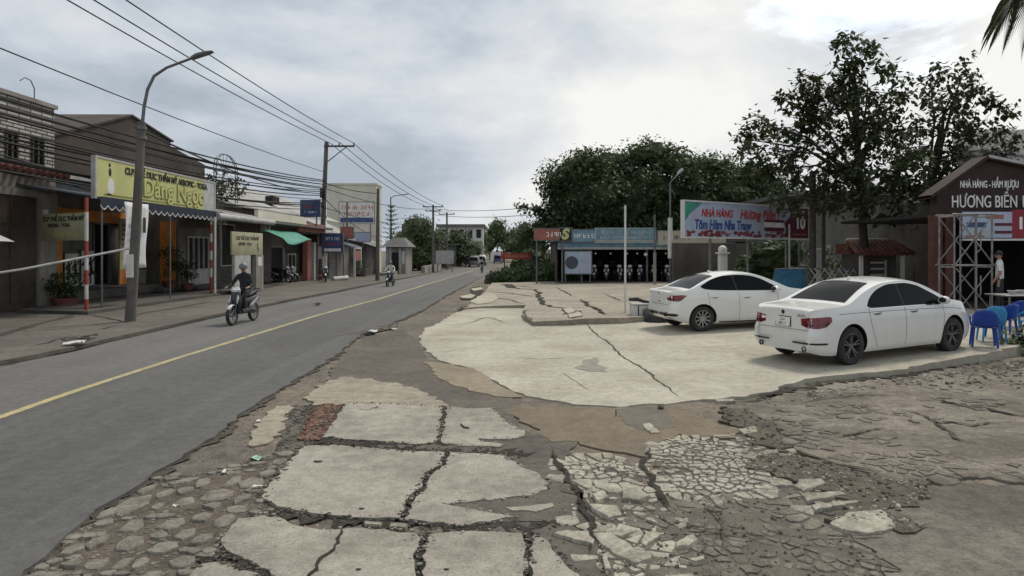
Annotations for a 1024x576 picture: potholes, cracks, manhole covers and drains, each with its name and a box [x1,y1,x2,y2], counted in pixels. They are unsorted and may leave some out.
crack [468,284,621,323]
crack [401,406,450,576]
crack [794,394,1024,471]
crack [639,447,784,551]
crack [307,527,343,576]
